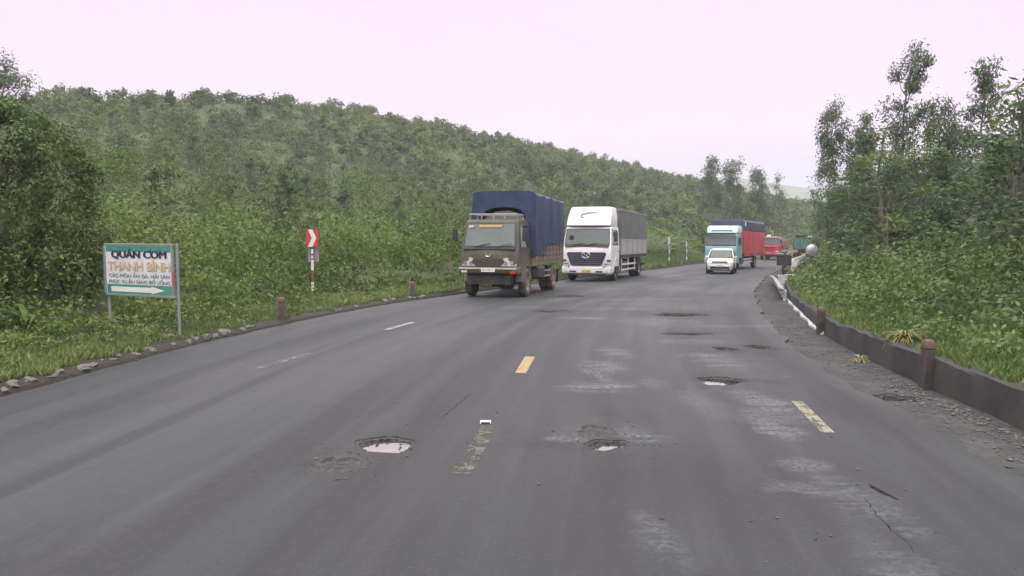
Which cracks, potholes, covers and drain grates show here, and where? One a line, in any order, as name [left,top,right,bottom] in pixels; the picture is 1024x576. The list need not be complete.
pothole [583,439,630,451]
crack [865,500,914,553]
pothole [872,393,922,402]
pothole [694,376,749,385]
pothole [354,436,416,453]
